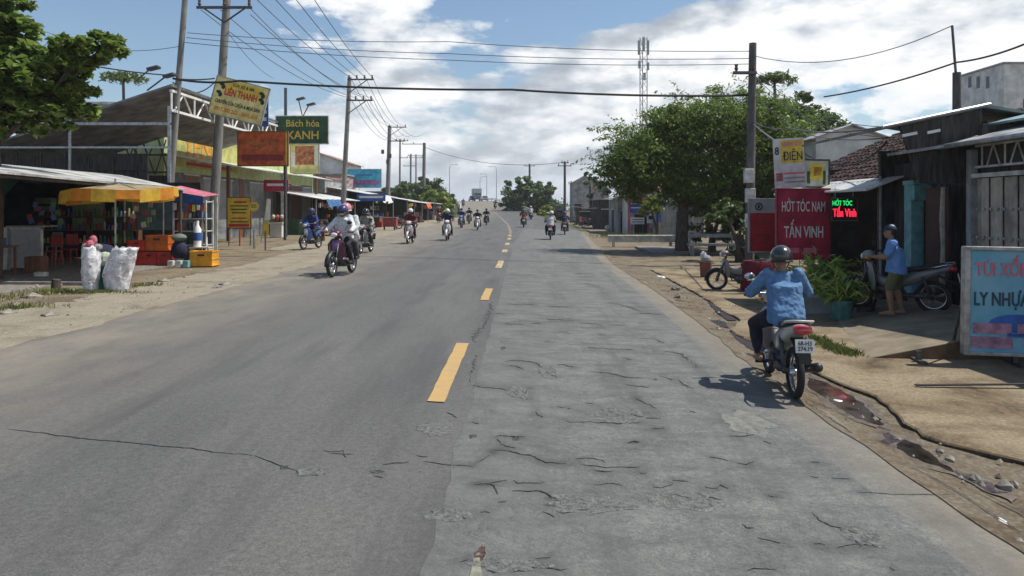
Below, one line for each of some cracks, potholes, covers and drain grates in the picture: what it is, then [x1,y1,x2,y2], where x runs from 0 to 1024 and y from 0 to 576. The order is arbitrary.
crack [474,480,588,517]
crack [812,512,875,548]
pothole [539,494,645,514]
crack [474,422,727,500]
pothole [506,386,528,399]
pothole [416,421,454,437]
pothole [422,508,473,521]
crack [11,429,297,471]
crack [507,338,696,443]
